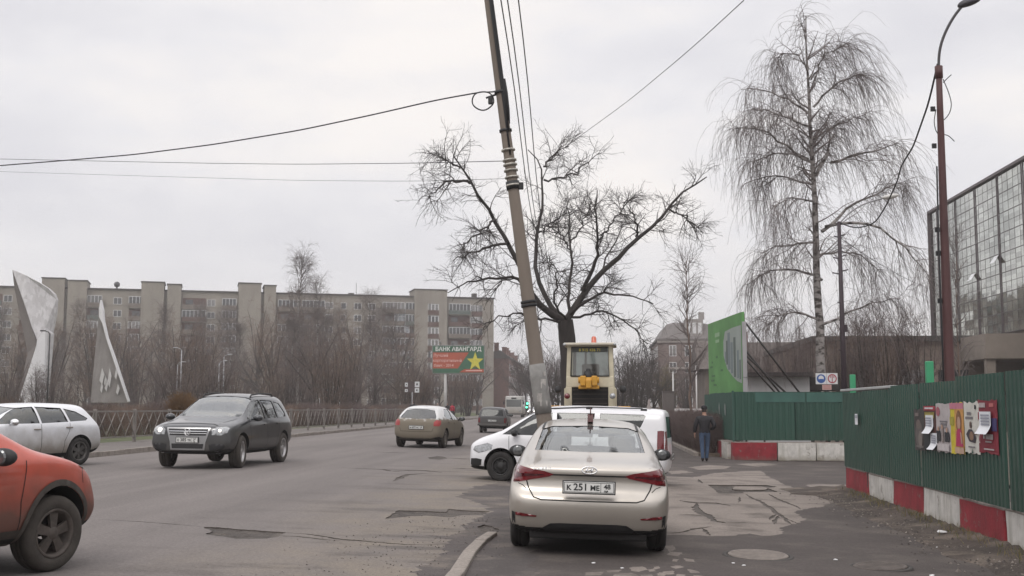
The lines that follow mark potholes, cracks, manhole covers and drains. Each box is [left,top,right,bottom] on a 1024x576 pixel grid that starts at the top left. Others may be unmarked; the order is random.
crack [677,494,800,535]
manhole cover [849,561,914,572]
pothole [204,527,285,539]
crack [98,519,416,545]
manhole cover [722,549,794,561]
